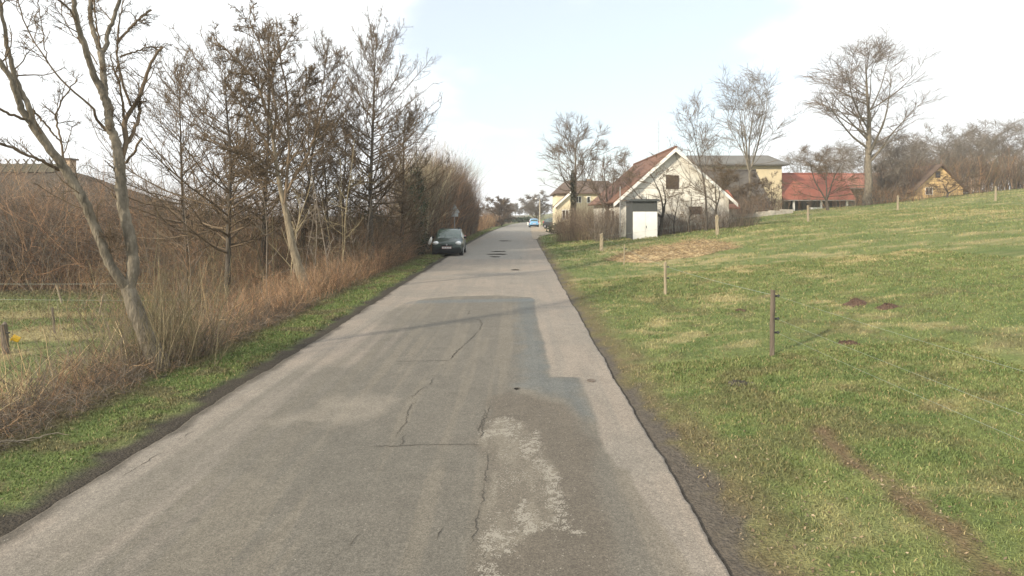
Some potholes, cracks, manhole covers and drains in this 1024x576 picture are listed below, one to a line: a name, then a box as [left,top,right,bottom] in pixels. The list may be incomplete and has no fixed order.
crack [369,378,489,447]
